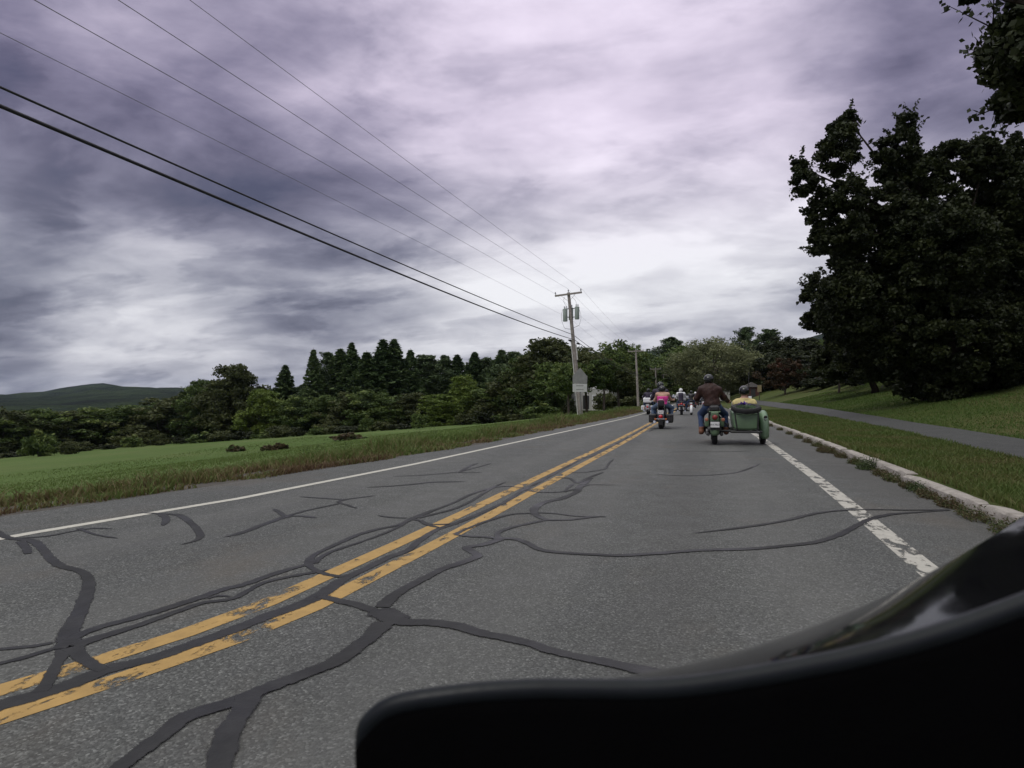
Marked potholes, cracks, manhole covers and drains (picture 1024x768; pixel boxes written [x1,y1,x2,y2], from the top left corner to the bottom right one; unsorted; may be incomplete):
crack [660,451,759,476]
crack [376,463,491,487]
